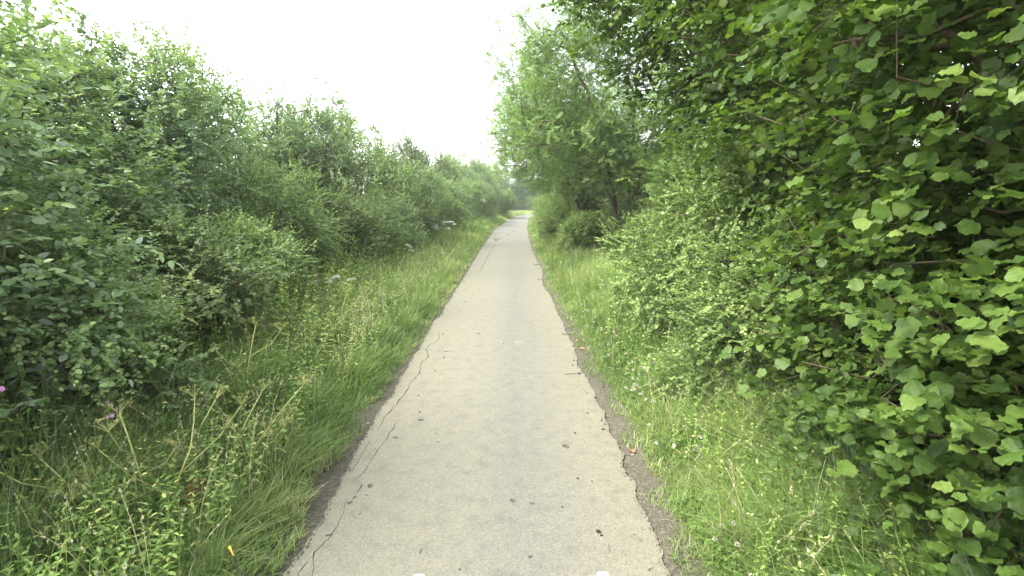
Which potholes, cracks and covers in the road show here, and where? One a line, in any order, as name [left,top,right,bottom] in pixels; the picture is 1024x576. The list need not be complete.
crack [298,331,440,576]
